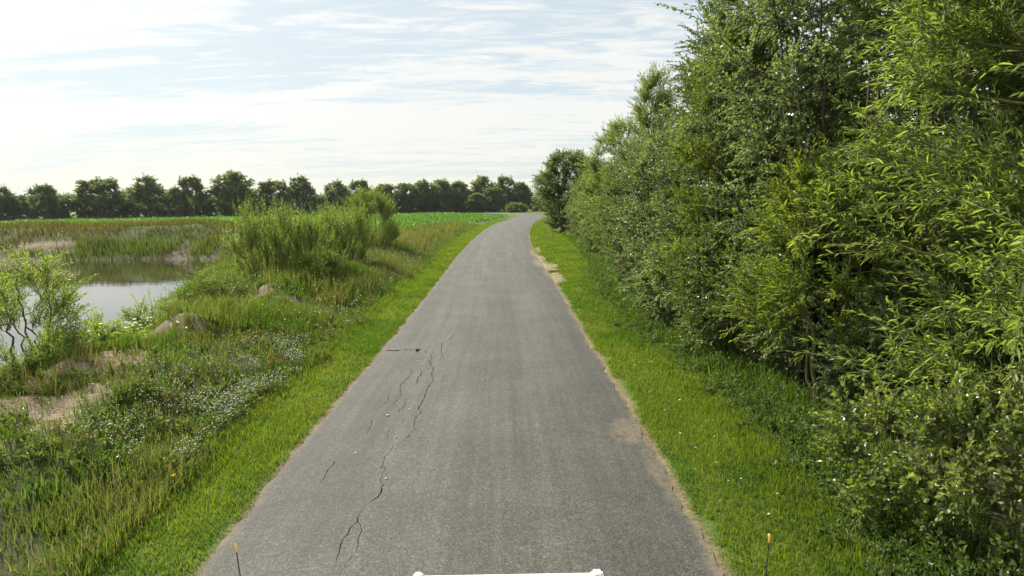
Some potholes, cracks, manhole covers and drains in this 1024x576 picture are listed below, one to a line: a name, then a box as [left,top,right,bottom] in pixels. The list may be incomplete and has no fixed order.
crack [336,327,455,576]
